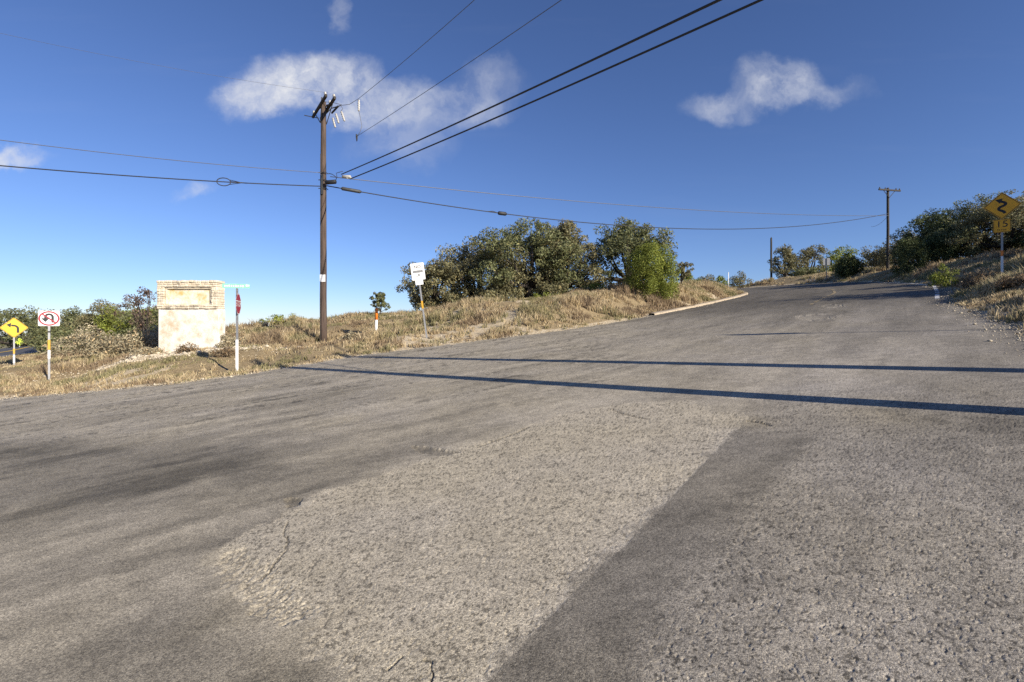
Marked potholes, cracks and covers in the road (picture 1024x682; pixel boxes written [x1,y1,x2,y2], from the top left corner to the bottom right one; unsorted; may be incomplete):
crack [262,521,290,580]
crack [422,657,435,682]
